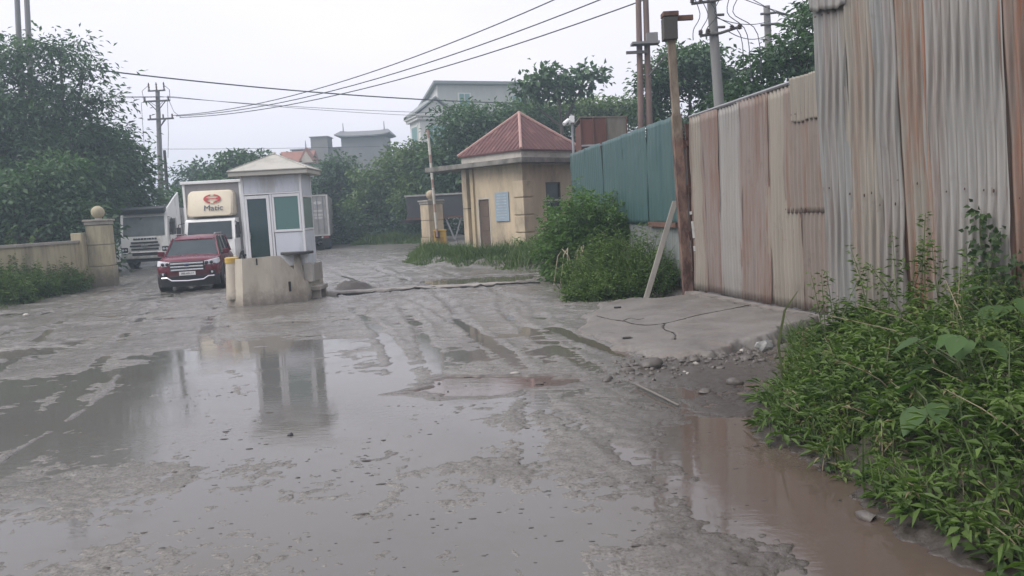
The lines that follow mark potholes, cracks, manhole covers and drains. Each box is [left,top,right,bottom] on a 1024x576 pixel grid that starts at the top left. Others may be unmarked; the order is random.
pothole [392,373,603,399]
crack [598,305,749,340]
